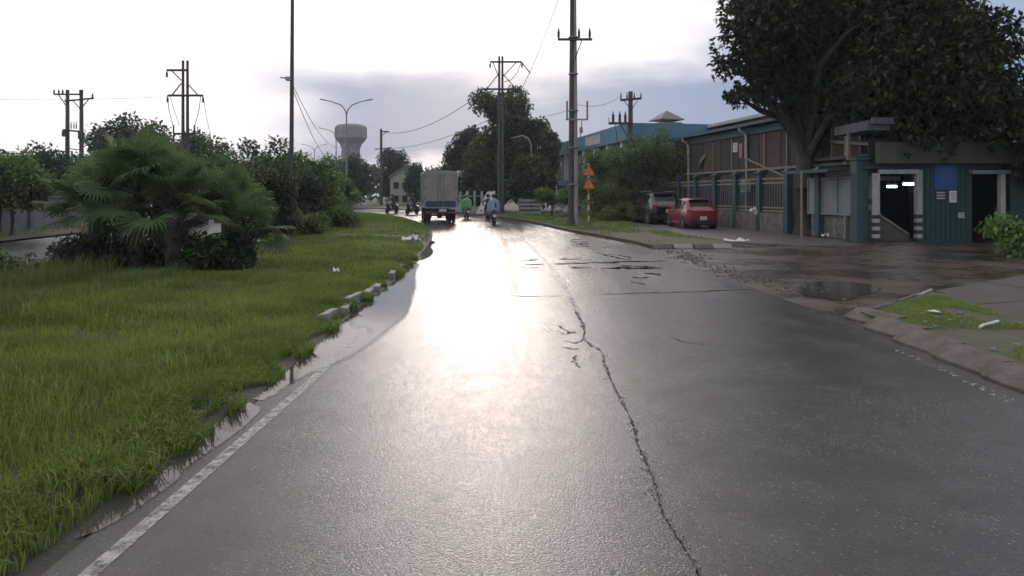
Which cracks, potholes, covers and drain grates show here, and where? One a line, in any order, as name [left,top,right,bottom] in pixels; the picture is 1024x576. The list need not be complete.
crack [520,239,754,576]
